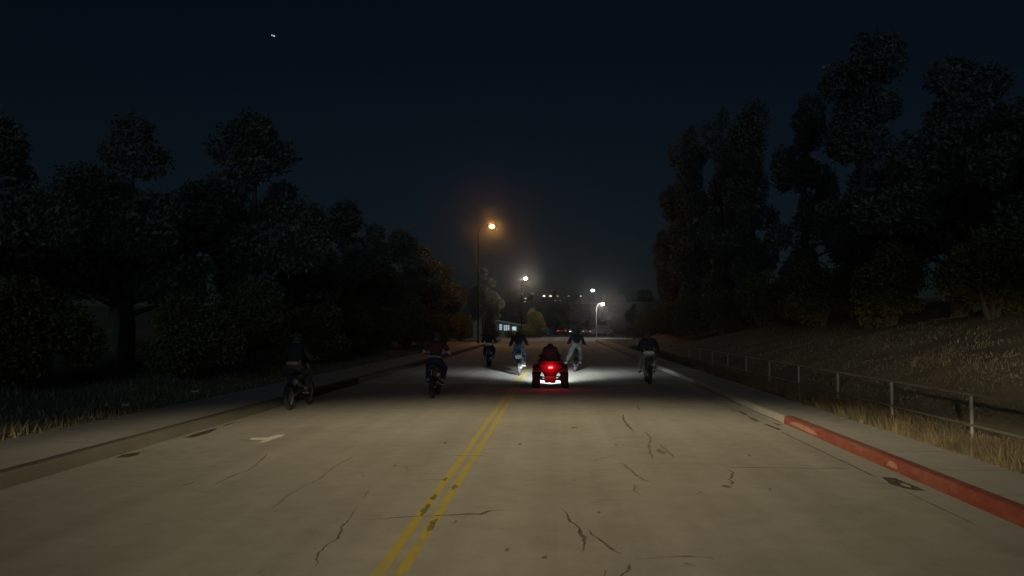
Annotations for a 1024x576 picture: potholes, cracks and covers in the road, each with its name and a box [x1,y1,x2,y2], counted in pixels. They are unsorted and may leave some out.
crack [557,406,714,576]
crack [216,422,267,484]
crack [315,491,498,568]
